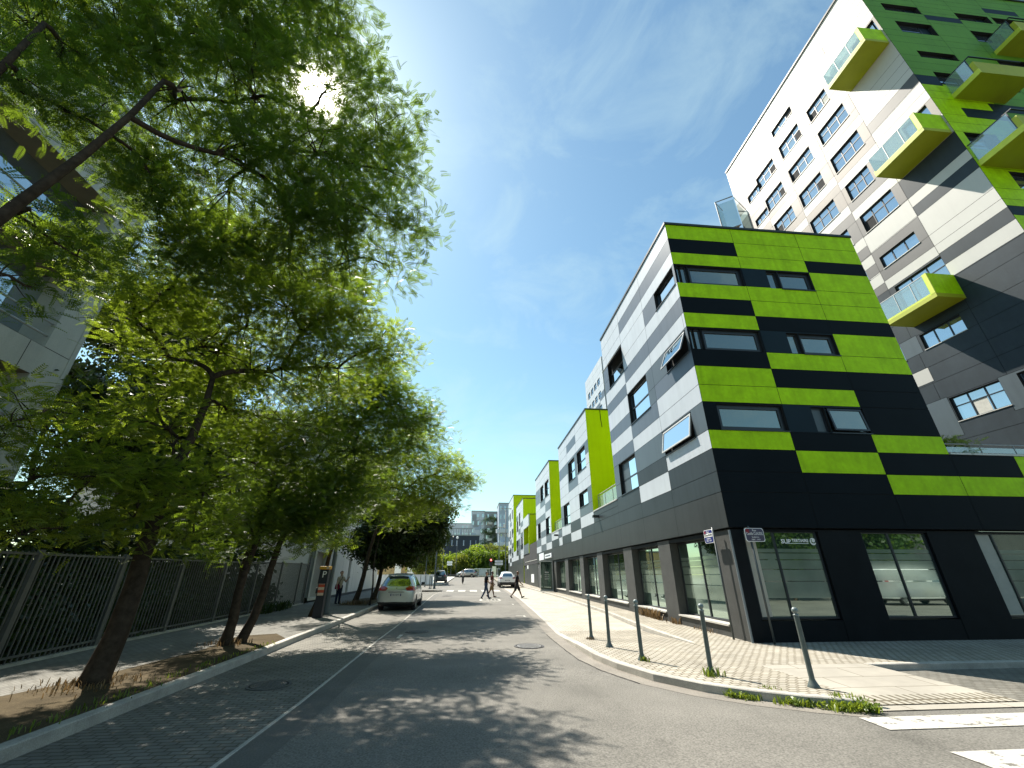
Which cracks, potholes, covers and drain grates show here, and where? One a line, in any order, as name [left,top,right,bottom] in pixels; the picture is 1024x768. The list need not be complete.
manhole cover [245,680,292,691]
